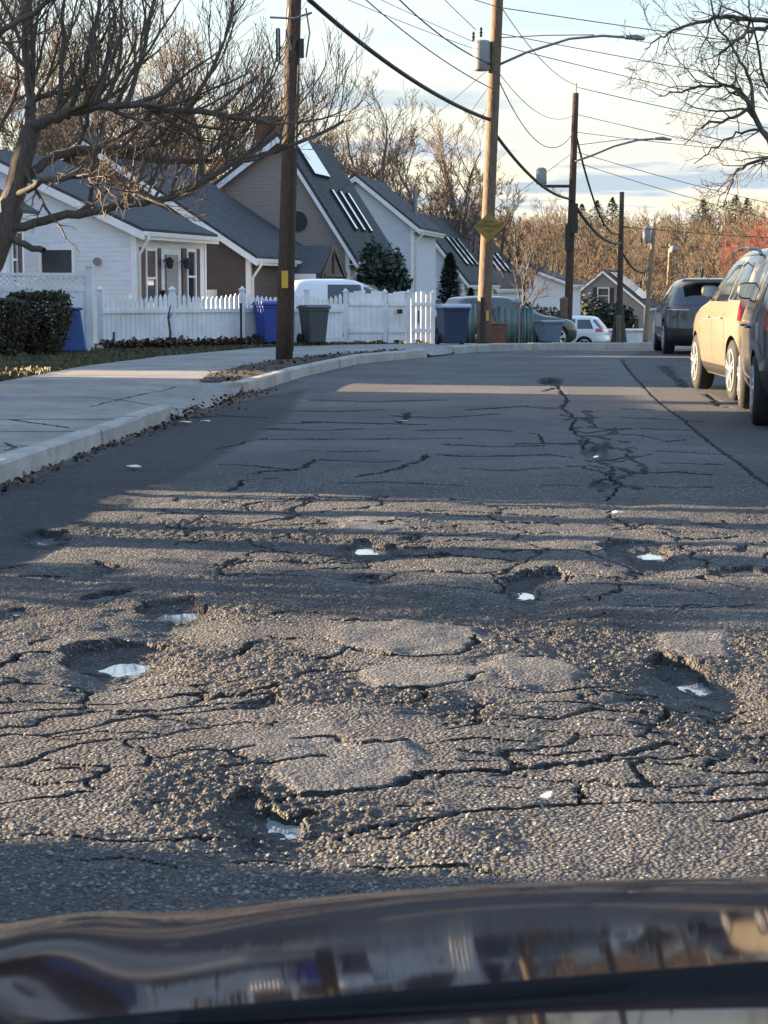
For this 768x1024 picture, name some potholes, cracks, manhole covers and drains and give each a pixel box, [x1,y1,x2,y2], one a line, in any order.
pothole [597,538,677,576]
pothole [641,650,720,701]
crack [0,634,768,869]
pothole [19,529,75,550]
crack [0,566,61,578]
pothole [77,589,127,610]
pothole [211,783,321,856]
crack [182,386,733,501]
crack [107,494,768,657]
pothole [56,638,173,686]
pothole [339,538,400,565]
pothole [134,595,211,630]
